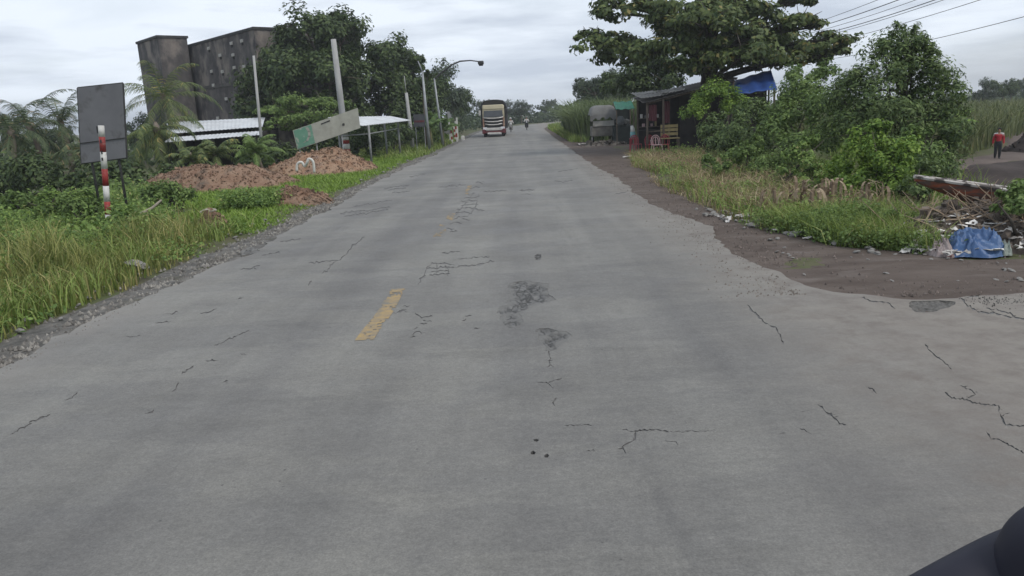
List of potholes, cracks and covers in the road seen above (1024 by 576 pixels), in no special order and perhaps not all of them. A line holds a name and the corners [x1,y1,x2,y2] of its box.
crack [748,305,784,343]
crack [618,429,712,454]
crack [308,237,364,285]
crack [418,251,494,284]
crack [11,393,77,434]
crack [780,406,846,434]
crack [145,330,249,414]
crack [925,344,1024,453]
crack [538,350,562,406]
crack [961,295,1024,320]
crack [340,174,506,232]
